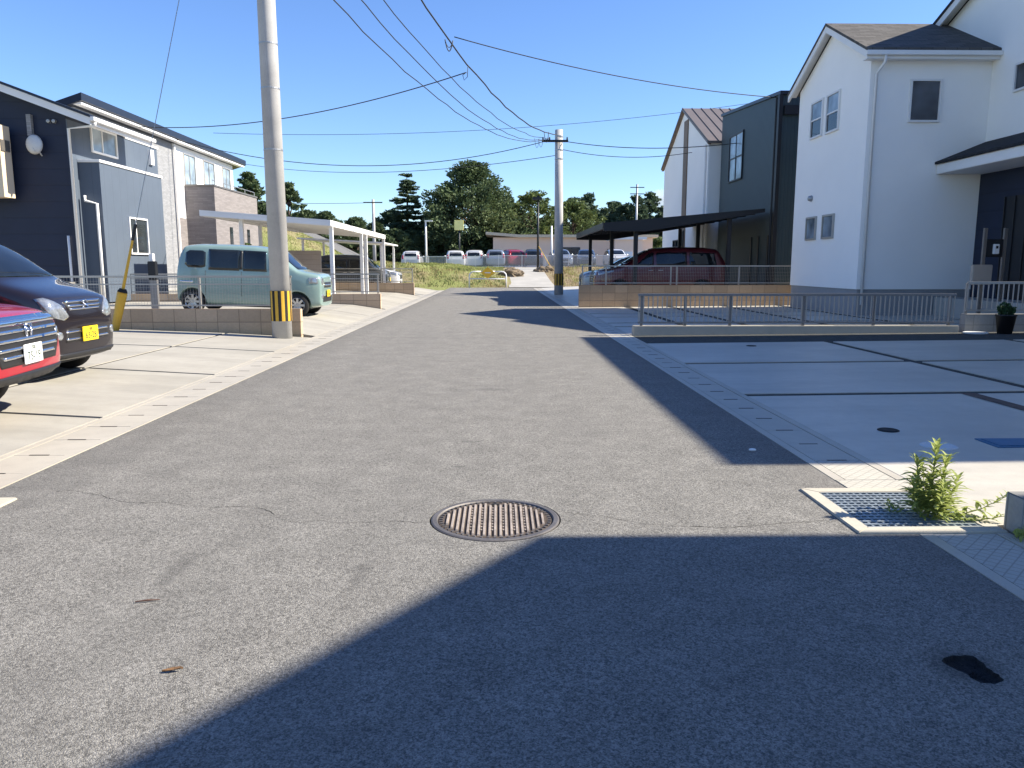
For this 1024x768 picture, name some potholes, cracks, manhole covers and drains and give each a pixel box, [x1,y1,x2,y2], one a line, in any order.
pothole [942,655,1004,684]
crack [577,513,827,528]
crack [57,490,419,523]
drain grate [799,488,1008,535]
manhole cover [431,499,559,542]
